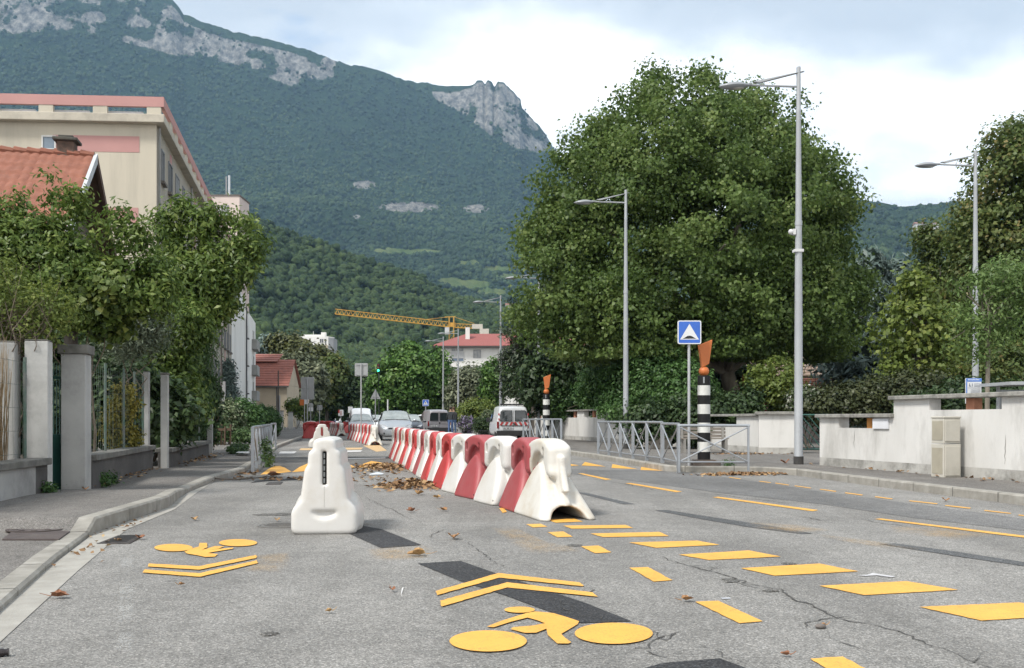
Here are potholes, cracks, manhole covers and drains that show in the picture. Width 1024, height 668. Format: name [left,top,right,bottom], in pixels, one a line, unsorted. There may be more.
drain grate [97,535,145,544]
manhole cover [2,528,70,541]
crack [665,557,991,668]
